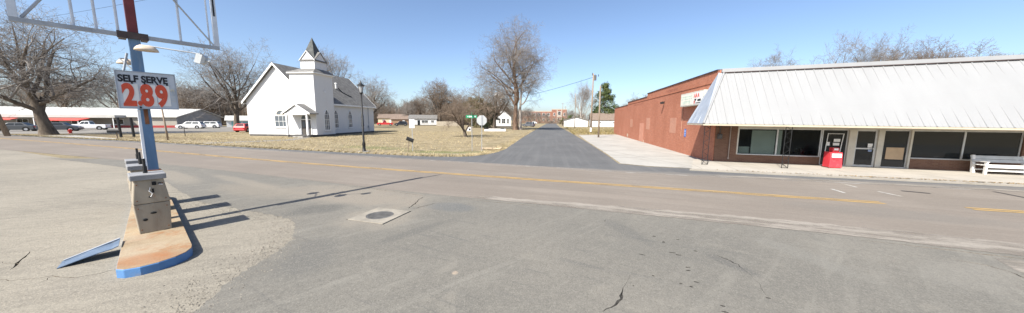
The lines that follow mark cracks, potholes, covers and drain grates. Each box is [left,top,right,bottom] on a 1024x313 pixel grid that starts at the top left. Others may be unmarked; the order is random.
manhole cover [348,207,410,225]
crack [604,276,630,311]
crack [0,252,112,283]
